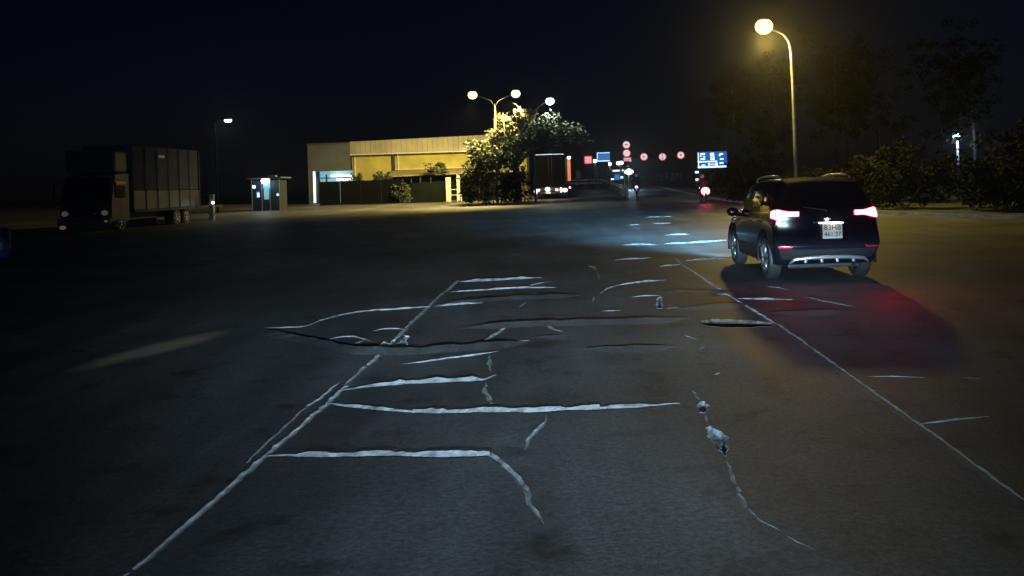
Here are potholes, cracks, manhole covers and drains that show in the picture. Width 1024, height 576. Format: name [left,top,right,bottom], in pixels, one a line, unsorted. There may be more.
pothole [700,319,775,328]
crack [262,216,858,550]
pothole [706,426,729,457]
pothole [696,401,710,413]
